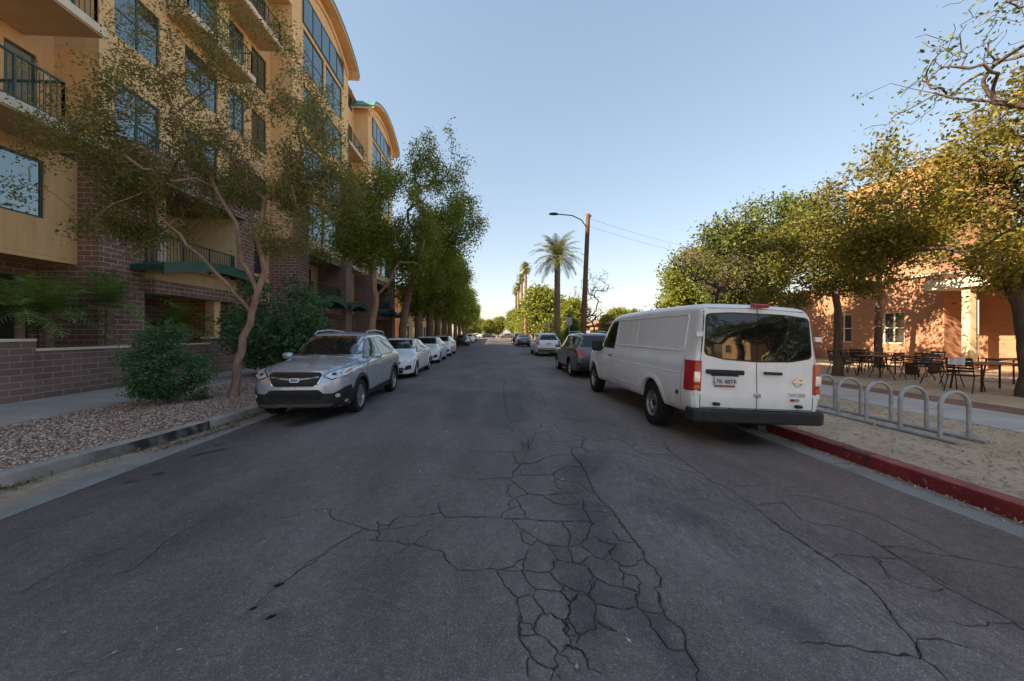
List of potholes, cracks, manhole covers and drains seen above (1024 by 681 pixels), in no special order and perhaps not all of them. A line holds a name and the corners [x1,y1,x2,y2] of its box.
crack [607,422,1024,676]
crack [259,381,700,681]
